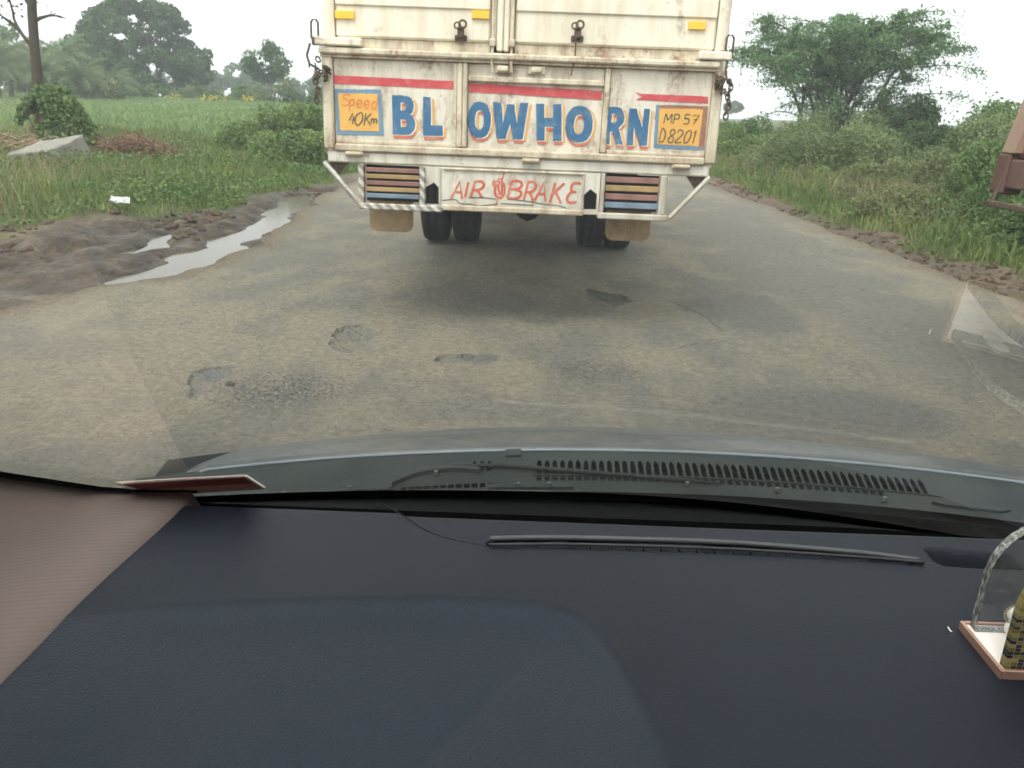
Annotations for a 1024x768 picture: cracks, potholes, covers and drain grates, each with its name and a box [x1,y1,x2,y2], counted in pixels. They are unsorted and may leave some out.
crack [515,302,724,352]
pothole [328,324,378,354]
pothole [186,365,237,399]
pothole [433,353,501,365]
pothole [584,289,633,306]
